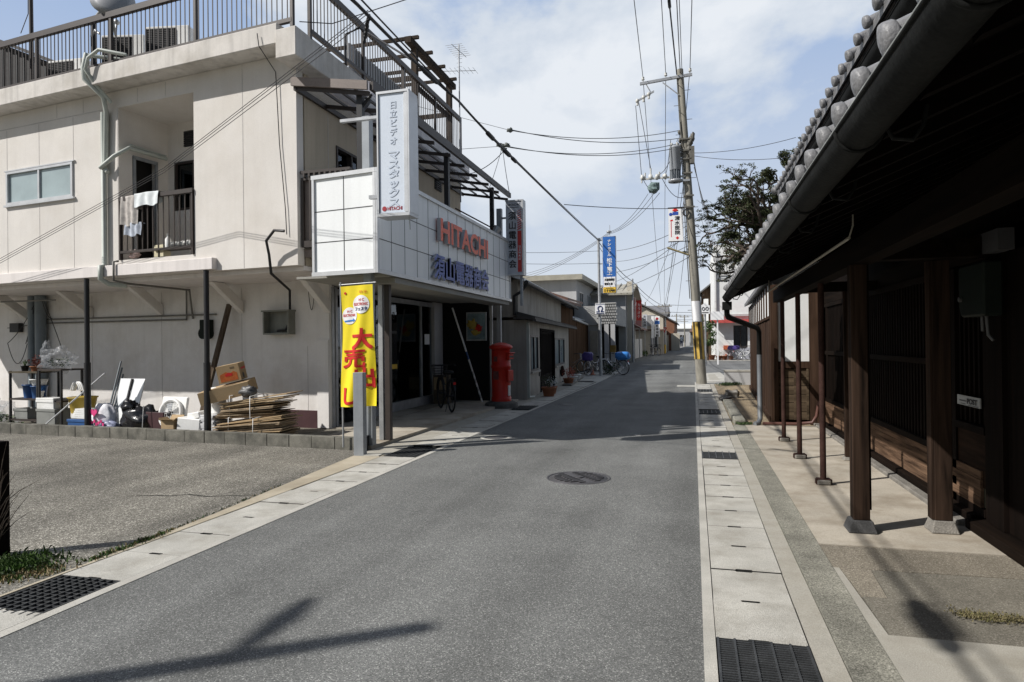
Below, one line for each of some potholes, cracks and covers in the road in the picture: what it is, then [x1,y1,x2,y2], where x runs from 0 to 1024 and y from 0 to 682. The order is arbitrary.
drain grate [385,447,437,458]
drain grate [717,637,822,682]
drain grate [702,451,738,460]
drain grate [0,575,120,616]
manhole cover [546,471,611,485]
